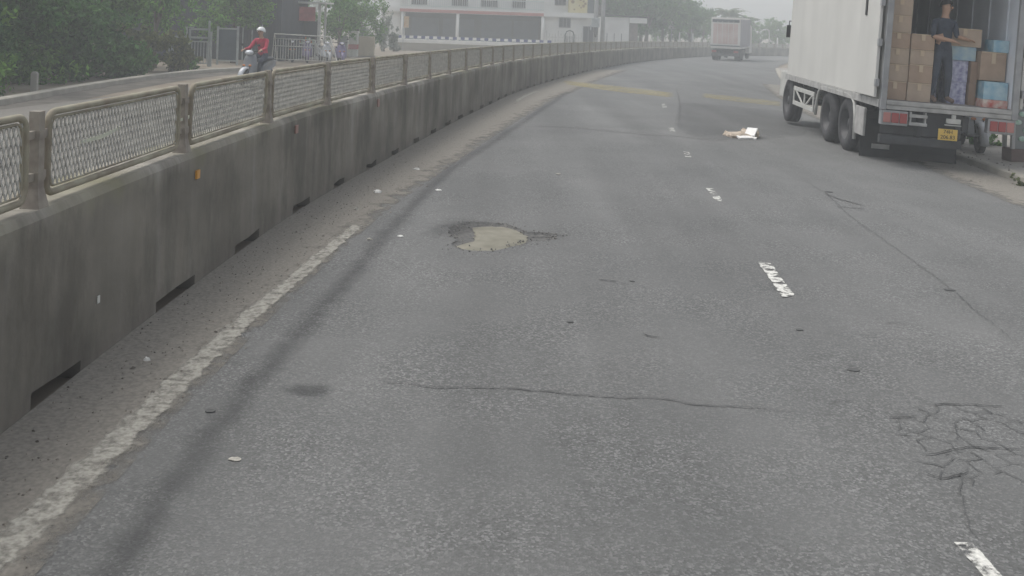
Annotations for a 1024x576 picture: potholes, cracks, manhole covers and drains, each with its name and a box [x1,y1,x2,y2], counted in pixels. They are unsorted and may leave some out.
crack [384,381,791,412]
crack [807,181,1018,344]
crack [897,403,1024,533]
pothole [448,222,558,251]
